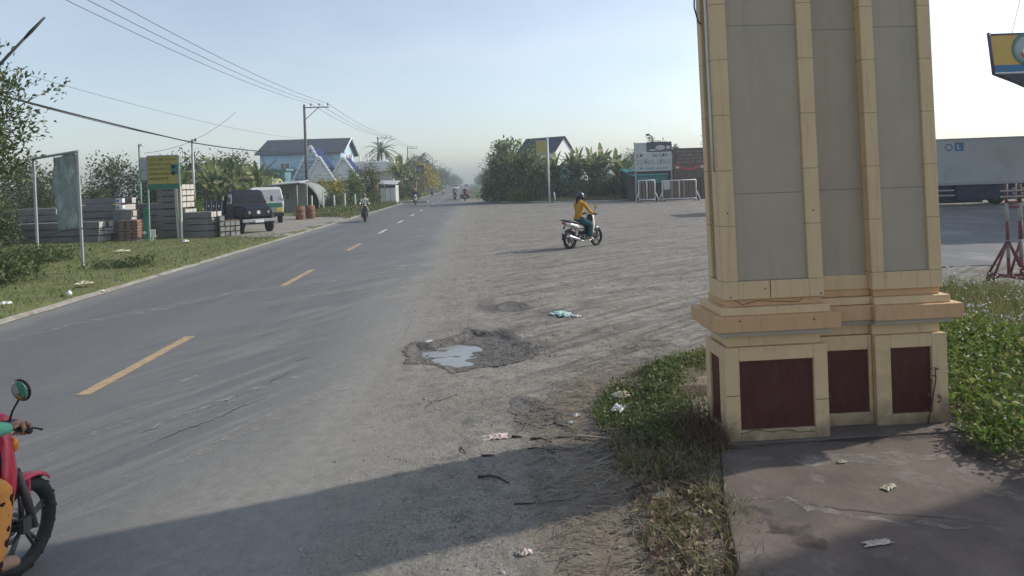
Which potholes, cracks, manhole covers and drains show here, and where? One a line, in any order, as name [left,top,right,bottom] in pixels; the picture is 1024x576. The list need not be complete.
pothole [495,301,534,312]
pothole [401,327,539,374]
crack [769,498,1001,525]
pothole [508,396,556,429]
crack [141,357,310,445]
